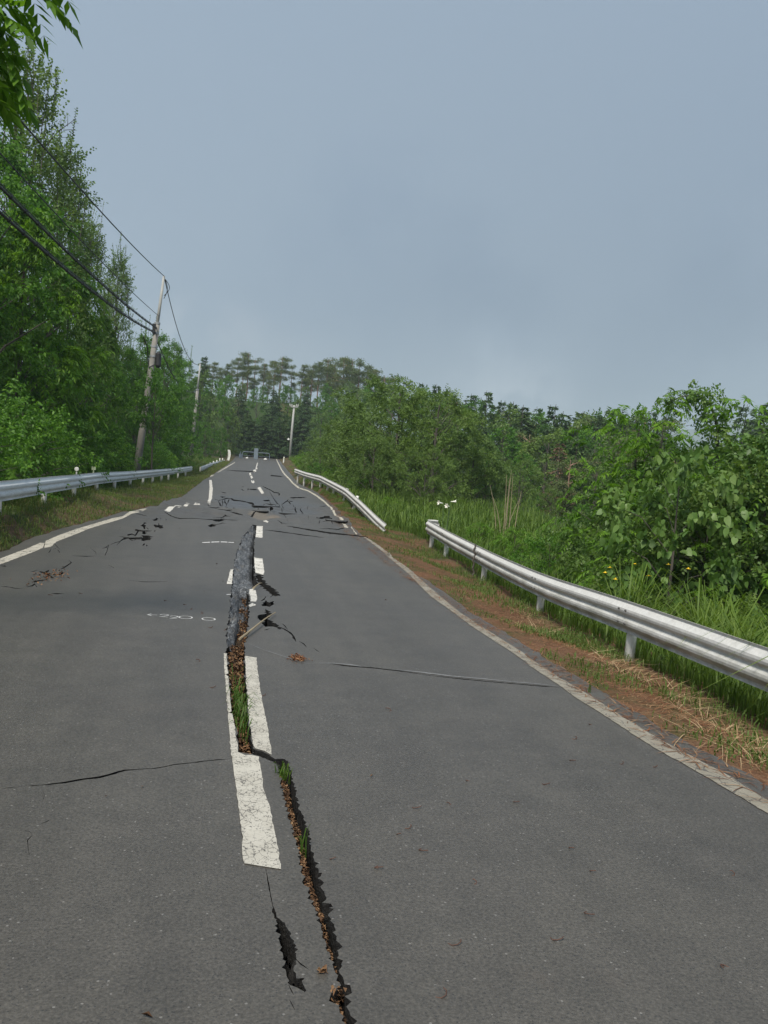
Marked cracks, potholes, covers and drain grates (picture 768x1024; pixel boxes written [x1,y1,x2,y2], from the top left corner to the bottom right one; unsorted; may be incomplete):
crack [2,470,368,1024]
